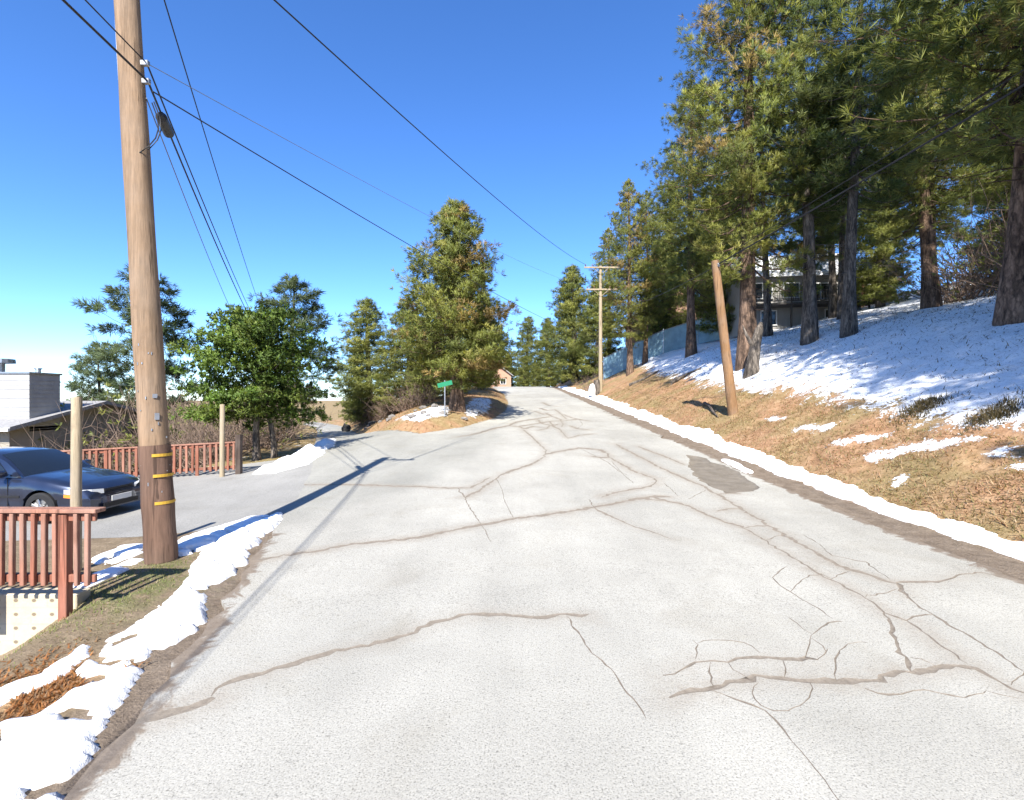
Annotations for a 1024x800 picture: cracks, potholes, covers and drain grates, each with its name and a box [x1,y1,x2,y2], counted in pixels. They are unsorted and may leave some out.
crack [257,402,1024,800]
crack [134,612,646,725]
